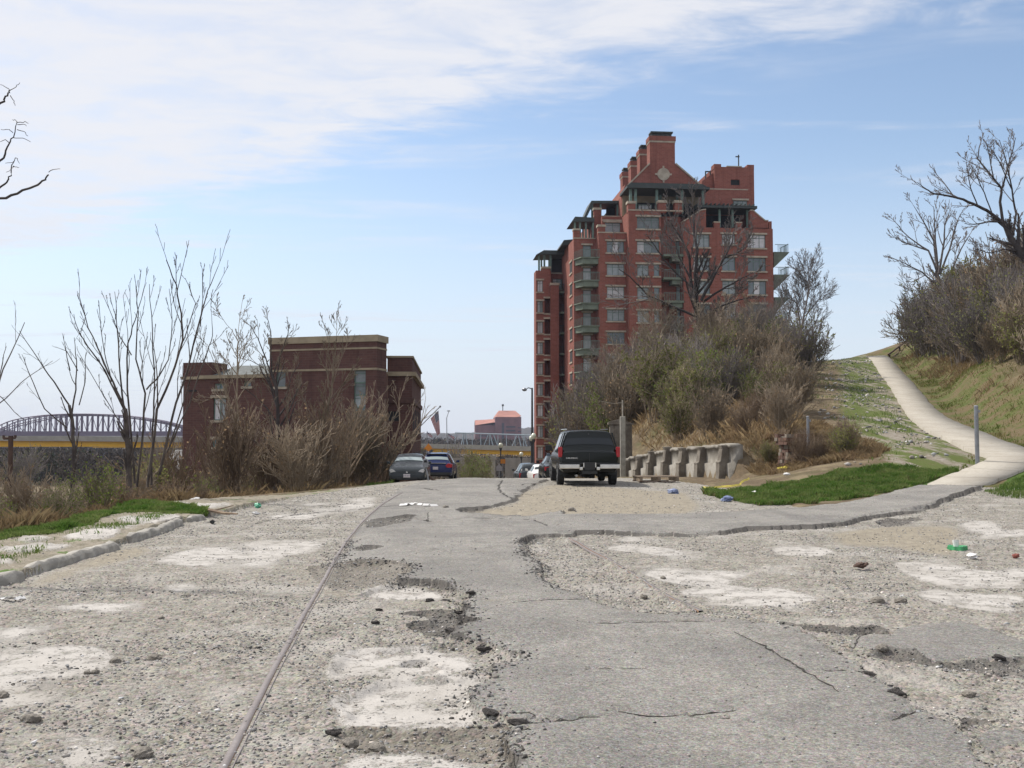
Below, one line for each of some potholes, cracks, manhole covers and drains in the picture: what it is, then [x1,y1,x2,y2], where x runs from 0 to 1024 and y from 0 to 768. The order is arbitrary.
pothole [330,724,515,764]
pothole [867,646,1024,677]
crack [598,613,861,692]
pothole [356,578,477,604]
pothole [777,621,889,636]
pothole [364,514,416,528]
crack [618,710,735,719]
pothole [398,605,481,639]
